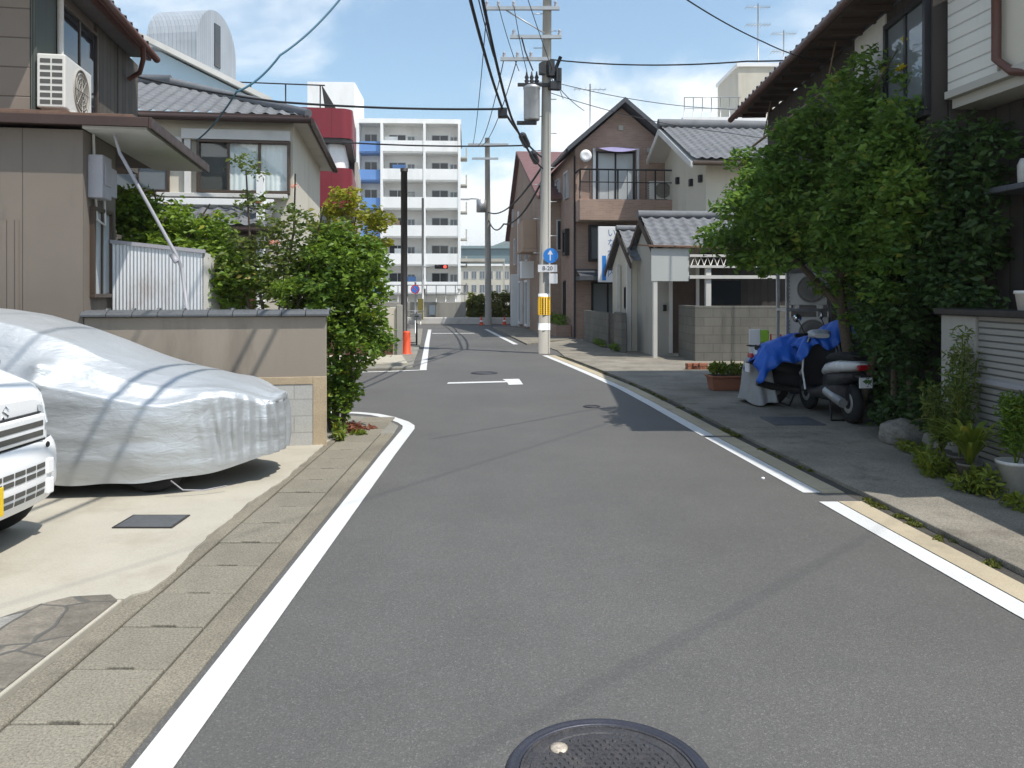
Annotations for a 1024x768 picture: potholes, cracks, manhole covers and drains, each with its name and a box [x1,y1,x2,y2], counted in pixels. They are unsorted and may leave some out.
manhole cover [505,718,709,768]
